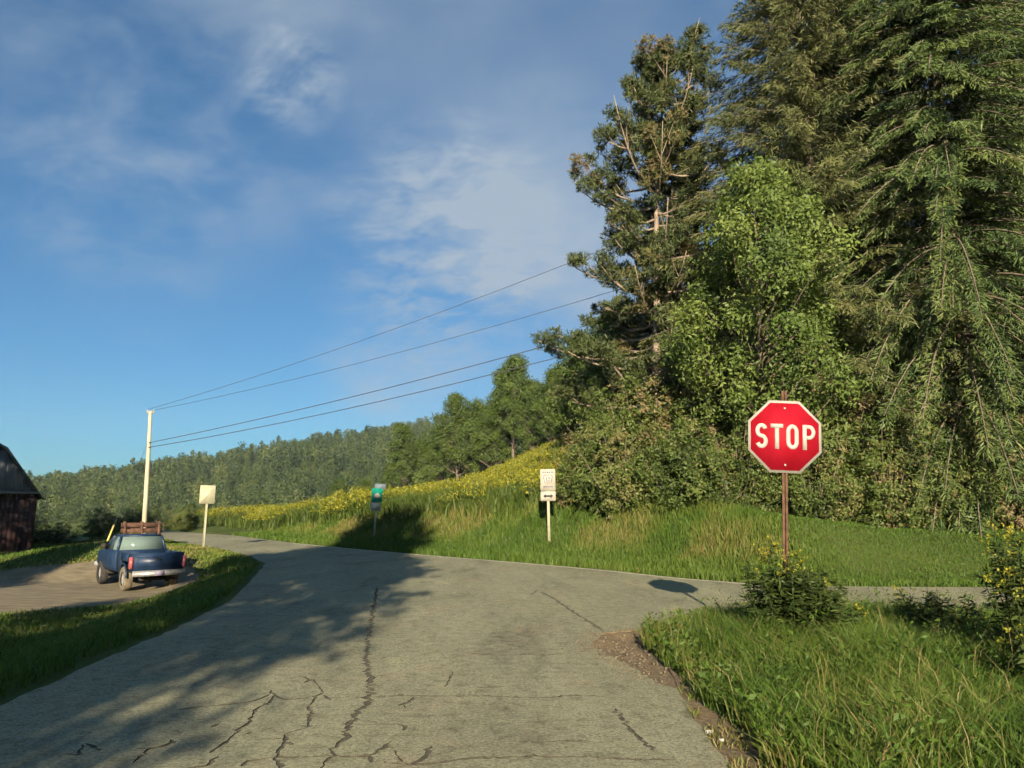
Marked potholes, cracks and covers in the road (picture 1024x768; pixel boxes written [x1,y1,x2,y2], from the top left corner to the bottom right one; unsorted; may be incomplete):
crack [133,588,675,768]
crack [69,743,102,755]
